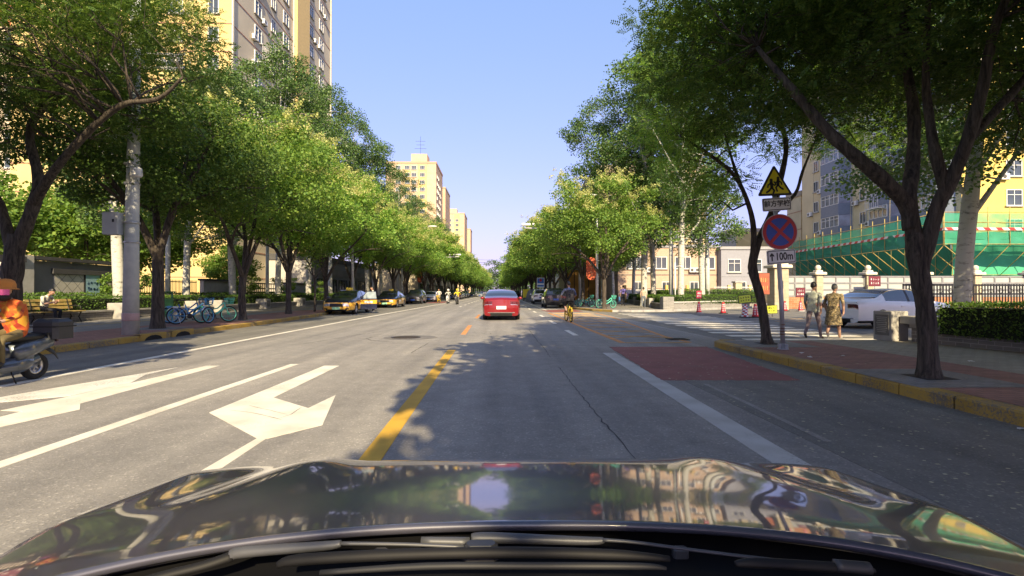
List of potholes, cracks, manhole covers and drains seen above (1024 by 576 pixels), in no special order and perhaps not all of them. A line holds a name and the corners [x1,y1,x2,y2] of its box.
crack [529,330,636,459]
drain grate [133,332,166,341]
drain grate [168,328,194,337]
